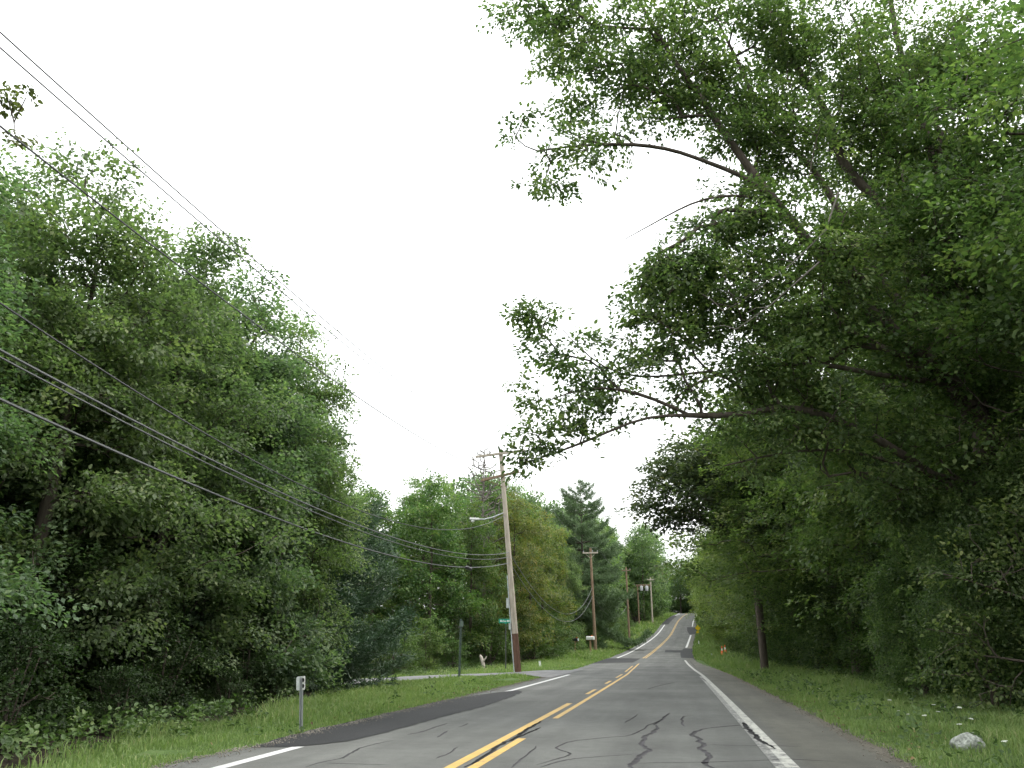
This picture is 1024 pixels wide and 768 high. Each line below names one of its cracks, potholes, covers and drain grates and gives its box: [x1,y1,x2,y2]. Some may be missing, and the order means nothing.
crack [306,713,821,768]
